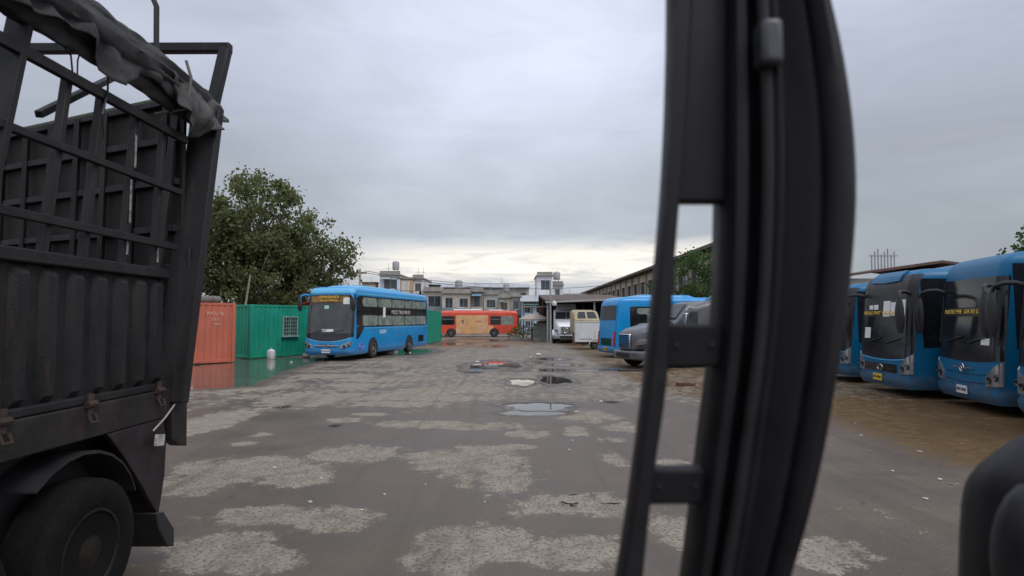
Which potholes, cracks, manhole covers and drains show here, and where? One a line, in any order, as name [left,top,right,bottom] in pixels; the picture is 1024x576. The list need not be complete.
pothole [464,361,526,371]
pothole [537,376,576,386]
pothole [507,379,542,387]
pothole [496,402,581,412]
